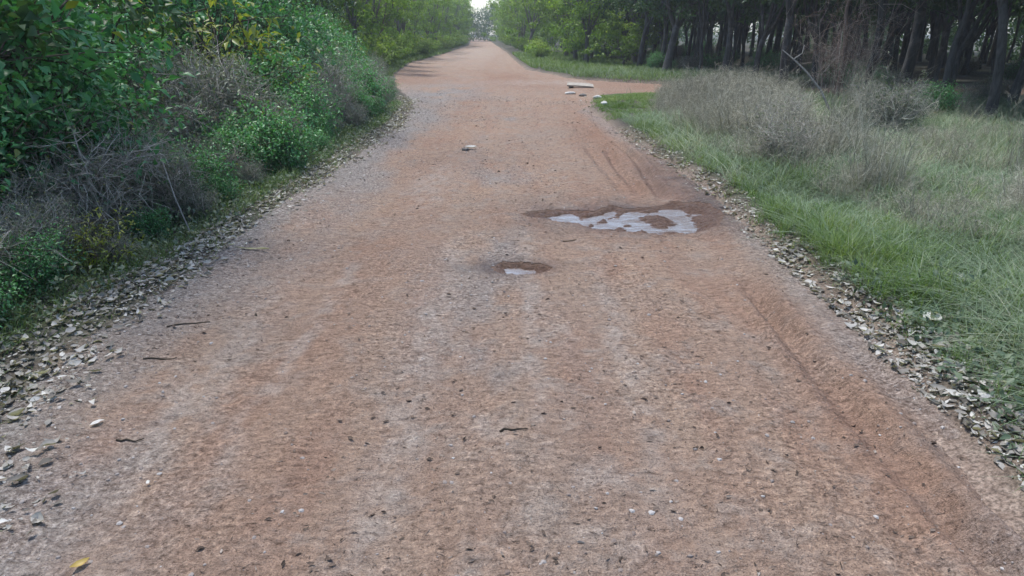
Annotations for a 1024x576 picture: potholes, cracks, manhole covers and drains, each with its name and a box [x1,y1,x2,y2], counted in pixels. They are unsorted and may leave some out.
pothole [491,261,553,275]
pothole [523,201,725,235]
